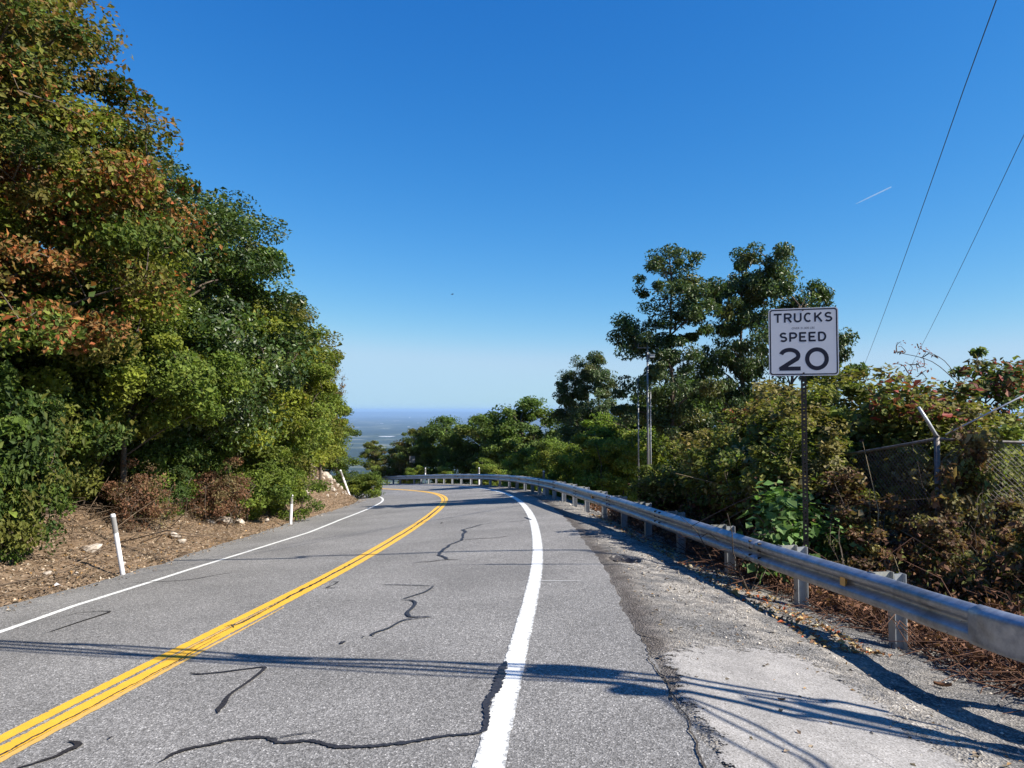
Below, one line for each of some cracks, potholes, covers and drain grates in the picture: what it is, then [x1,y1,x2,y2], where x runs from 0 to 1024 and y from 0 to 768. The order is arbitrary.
crack [0,509,532,755]
pothole [609,554,642,563]
crack [640,632,707,768]
